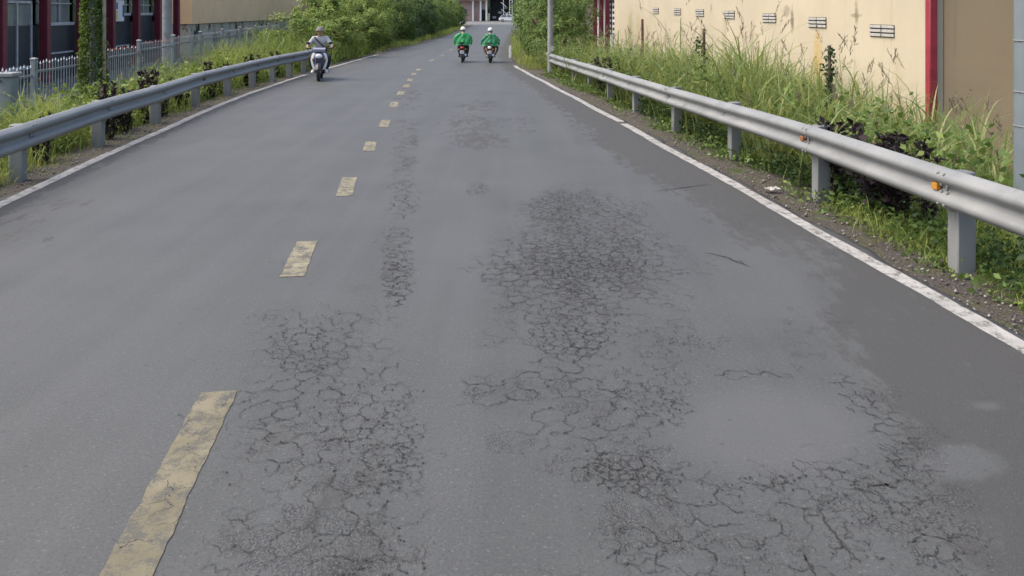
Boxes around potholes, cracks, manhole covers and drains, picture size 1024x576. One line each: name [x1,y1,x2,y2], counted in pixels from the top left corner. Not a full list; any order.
crack [264,122,420,328]
crack [202,303,446,576]
crack [537,368,993,576]
